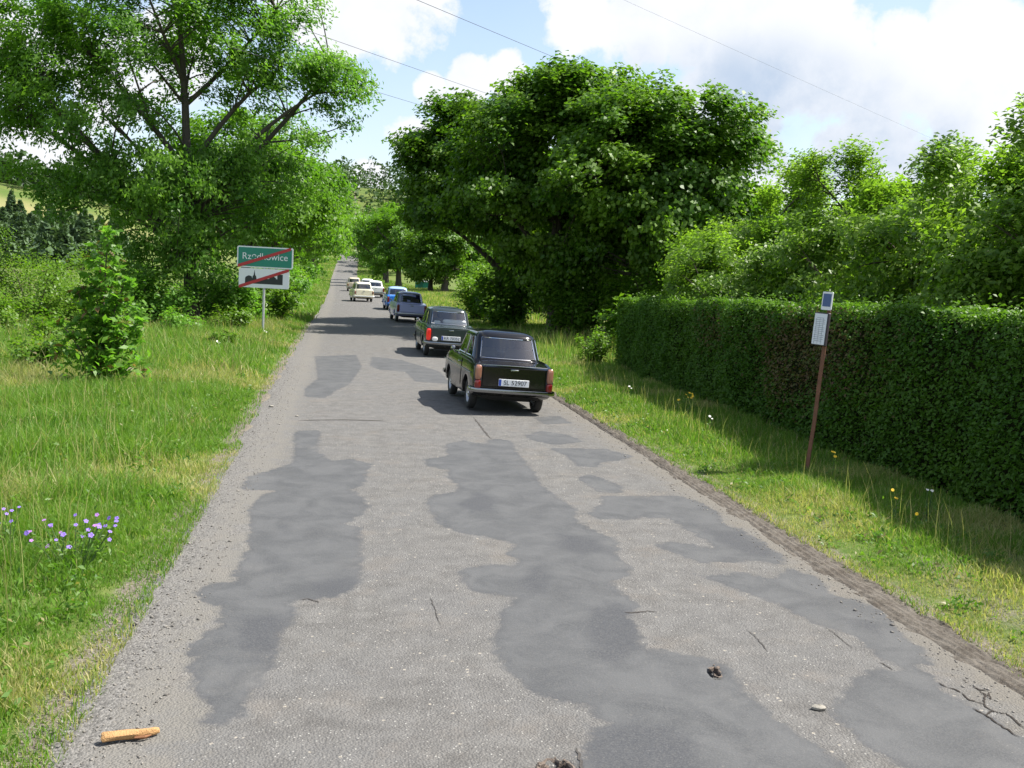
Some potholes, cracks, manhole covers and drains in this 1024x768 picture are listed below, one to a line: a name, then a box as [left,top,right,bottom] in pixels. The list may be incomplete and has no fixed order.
crack [940,679,1023,737]
